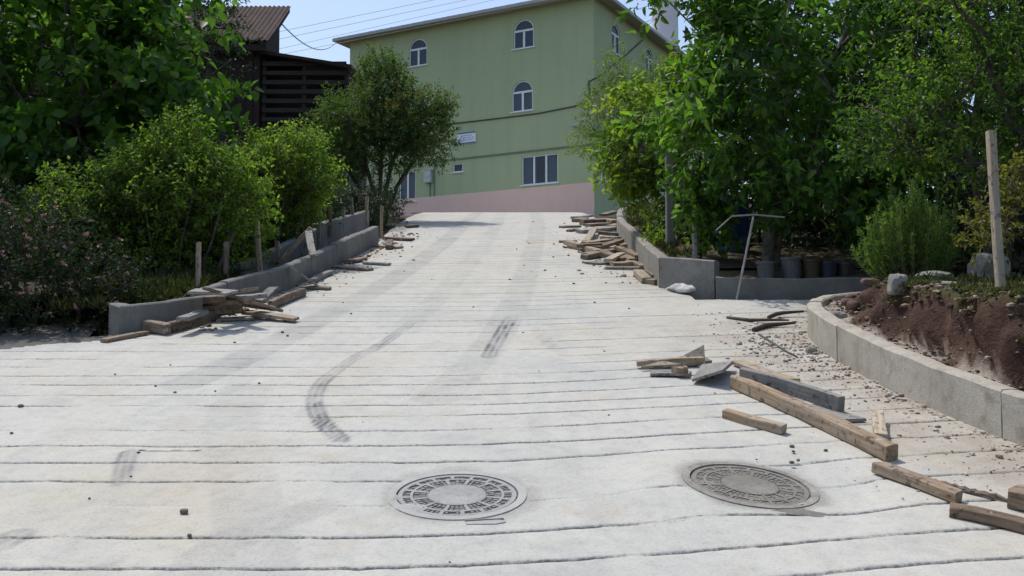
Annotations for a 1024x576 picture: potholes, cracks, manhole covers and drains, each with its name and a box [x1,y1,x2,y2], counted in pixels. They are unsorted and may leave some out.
manhole cover [682,461,830,517]
manhole cover [386,471,527,525]
